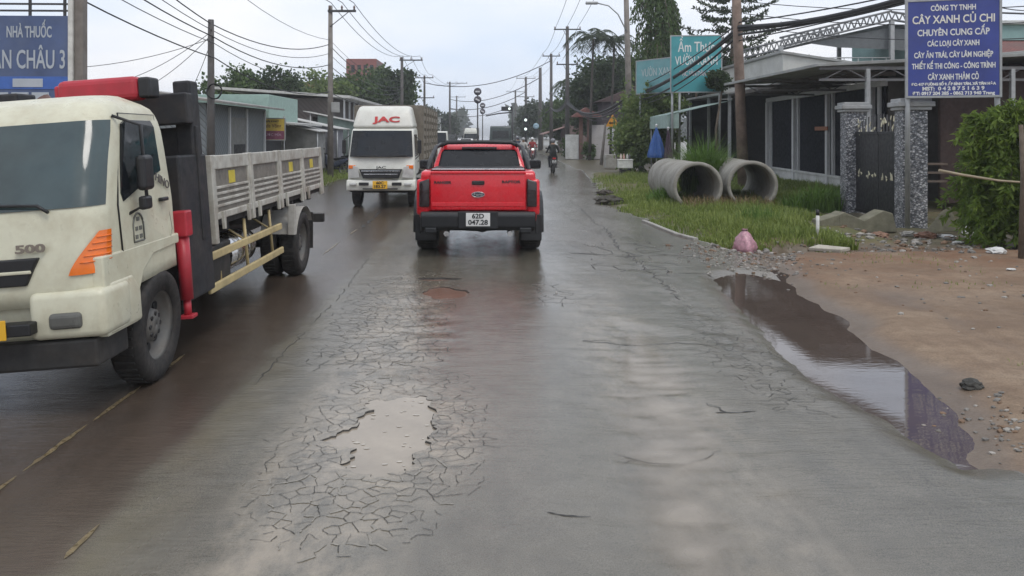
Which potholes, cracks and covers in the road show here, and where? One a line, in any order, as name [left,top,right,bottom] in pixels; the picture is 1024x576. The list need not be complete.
crack [235,270,498,562]
crack [614,451,721,465]
pothole [321,395,437,477]
crack [560,208,838,418]
pothole [422,287,470,299]
